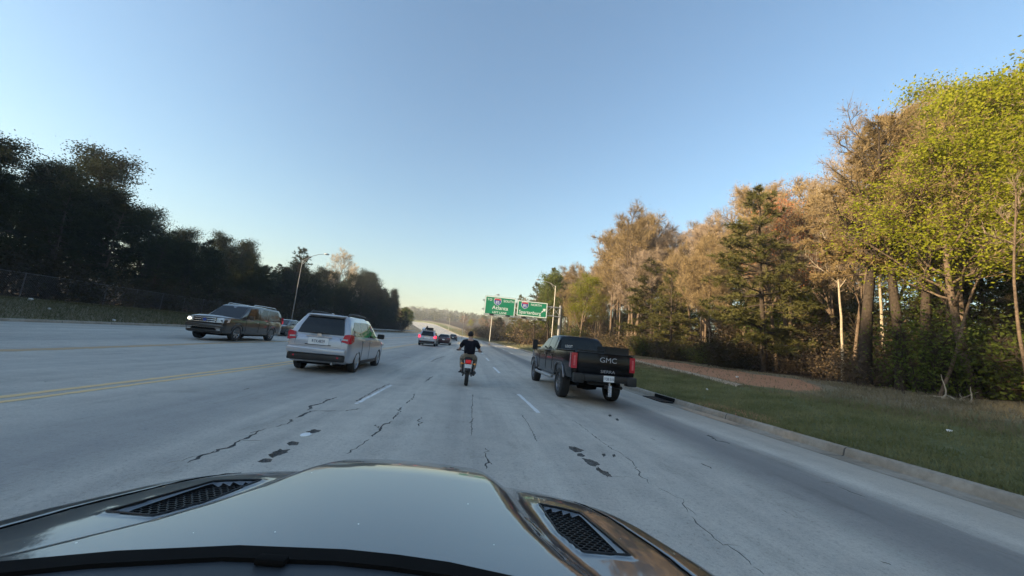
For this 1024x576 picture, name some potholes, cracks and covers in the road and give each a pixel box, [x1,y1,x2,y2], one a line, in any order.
crack [182,356,444,462]
crack [469,395,492,469]
crack [581,425,751,564]
